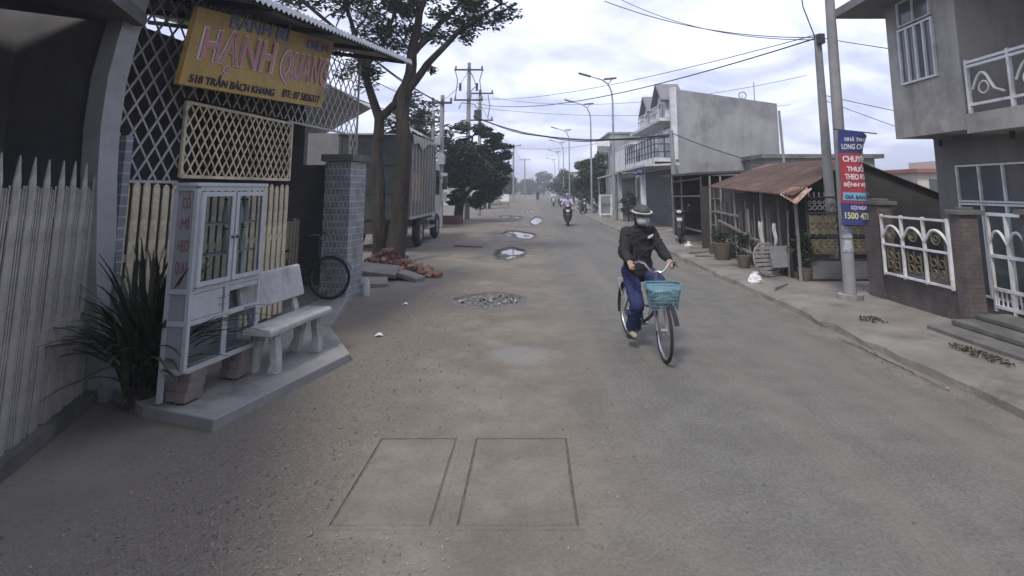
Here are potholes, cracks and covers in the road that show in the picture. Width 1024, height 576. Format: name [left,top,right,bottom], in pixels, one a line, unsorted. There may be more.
pothole [448,291,529,309]
pothole [492,246,527,261]
pothole [499,230,539,239]
